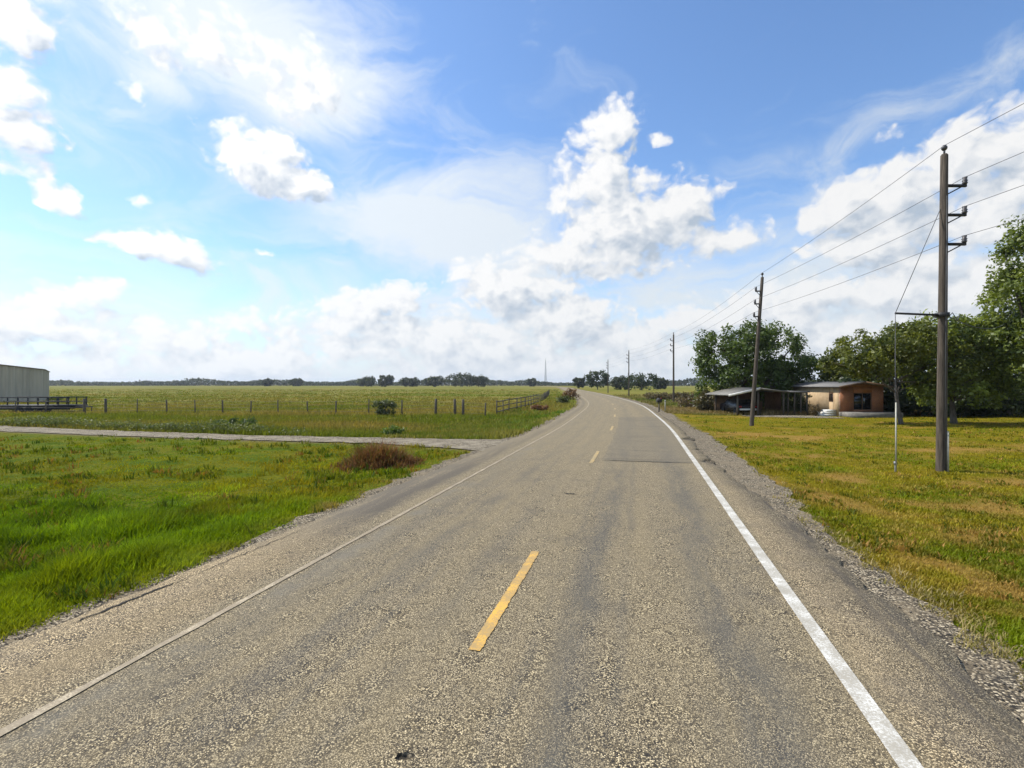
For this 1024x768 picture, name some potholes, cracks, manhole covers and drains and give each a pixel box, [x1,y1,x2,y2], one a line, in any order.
pothole [395,751,415,760]
